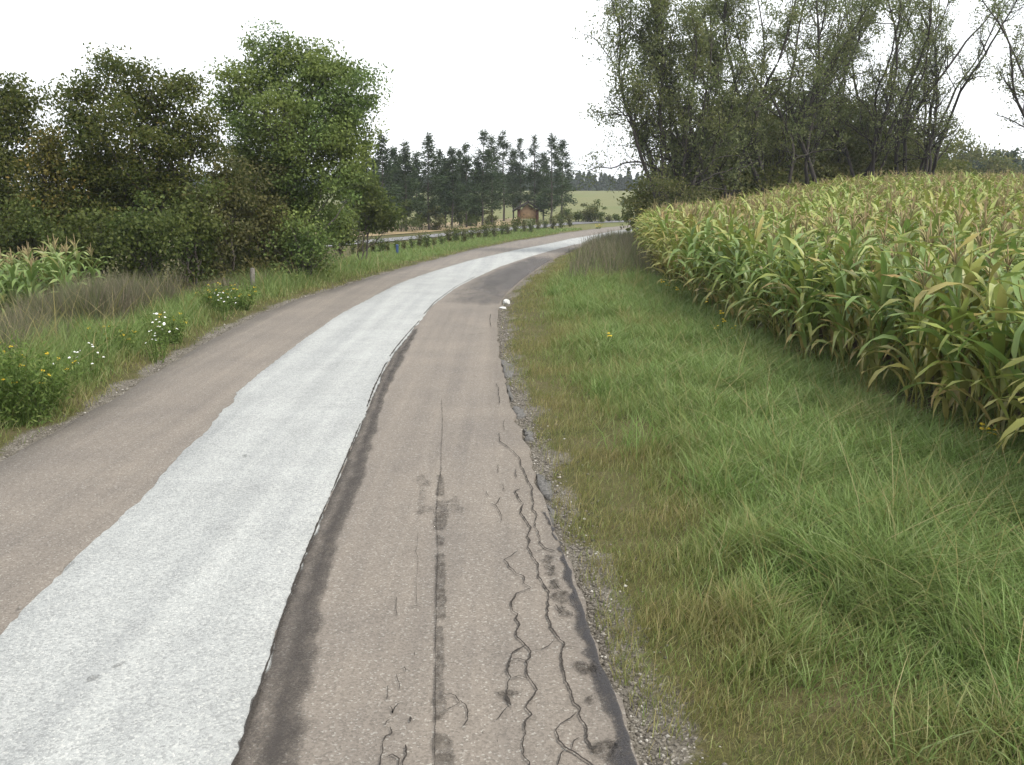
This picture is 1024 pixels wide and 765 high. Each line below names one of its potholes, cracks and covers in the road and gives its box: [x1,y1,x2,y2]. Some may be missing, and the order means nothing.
crack [379,651,415,765]
crack [486,387,601,765]
